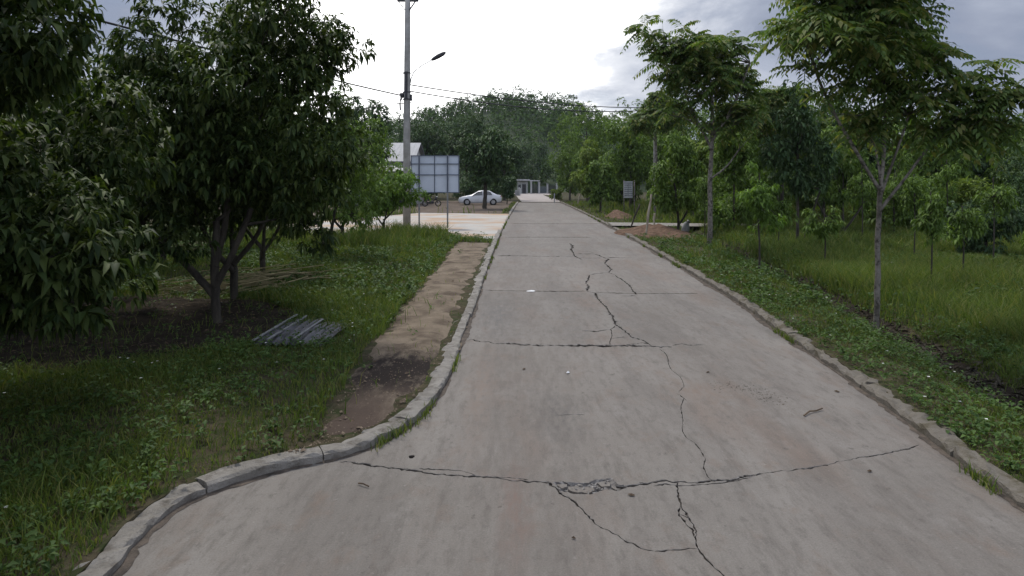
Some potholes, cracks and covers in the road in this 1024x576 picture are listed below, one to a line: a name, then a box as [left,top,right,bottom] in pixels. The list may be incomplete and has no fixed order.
crack [343,243,918,576]
